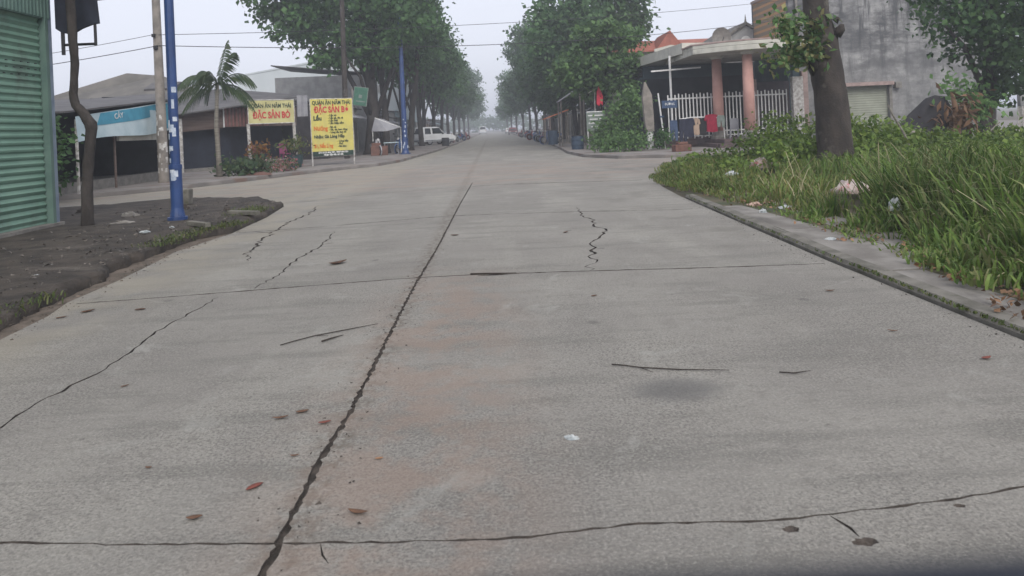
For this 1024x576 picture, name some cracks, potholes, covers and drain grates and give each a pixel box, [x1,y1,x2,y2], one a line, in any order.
crack [255,232,335,288]
crack [831,516,858,539]
crack [0,298,215,429]
crack [242,188,444,261]
crack [577,208,607,271]
